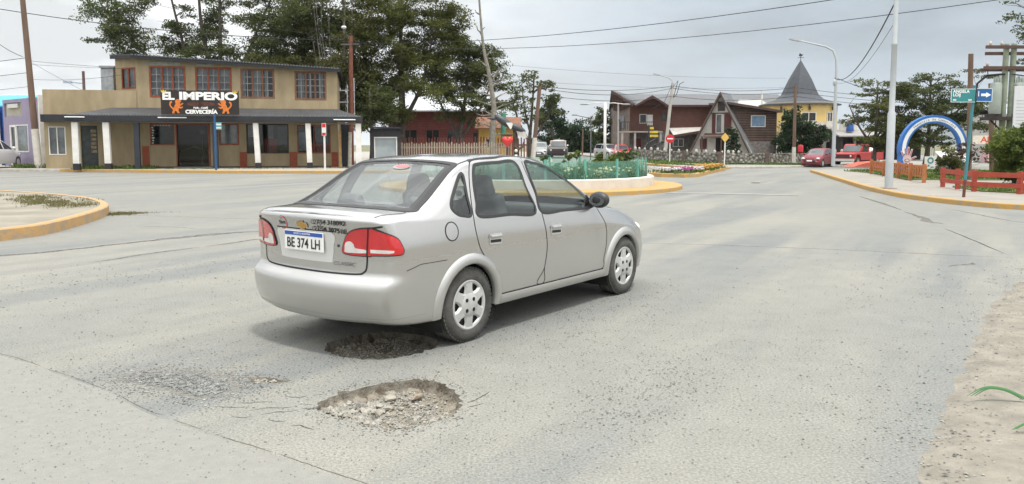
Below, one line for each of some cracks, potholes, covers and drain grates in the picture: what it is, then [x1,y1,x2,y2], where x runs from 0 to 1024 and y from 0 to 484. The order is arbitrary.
crack [217,396,321,430]
pothole [316,379,463,430]
pothole [324,332,439,360]
crack [862,197,1024,267]
